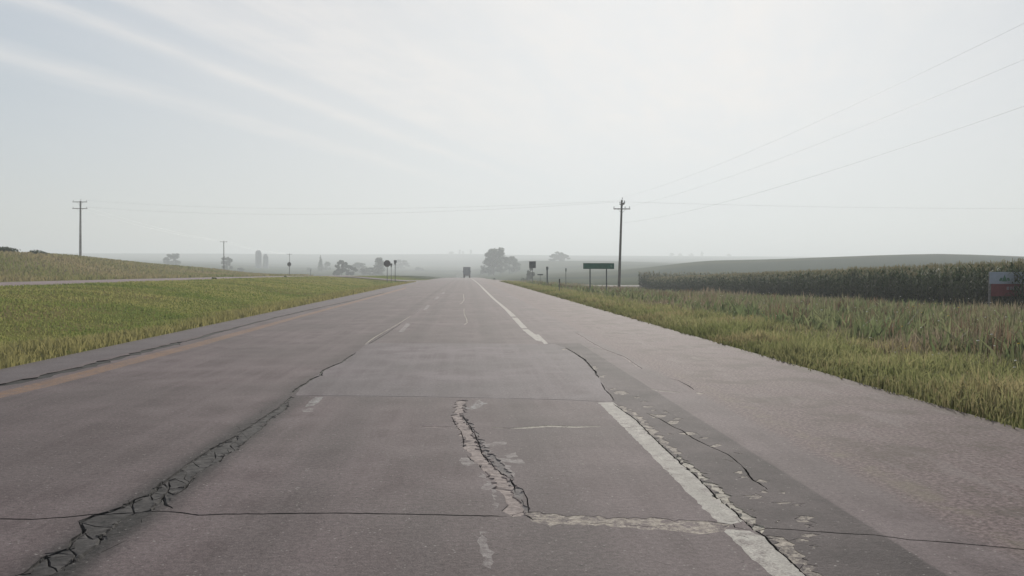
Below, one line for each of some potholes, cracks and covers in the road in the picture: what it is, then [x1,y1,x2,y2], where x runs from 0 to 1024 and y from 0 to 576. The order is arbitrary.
crack [0,290,1024,576]
